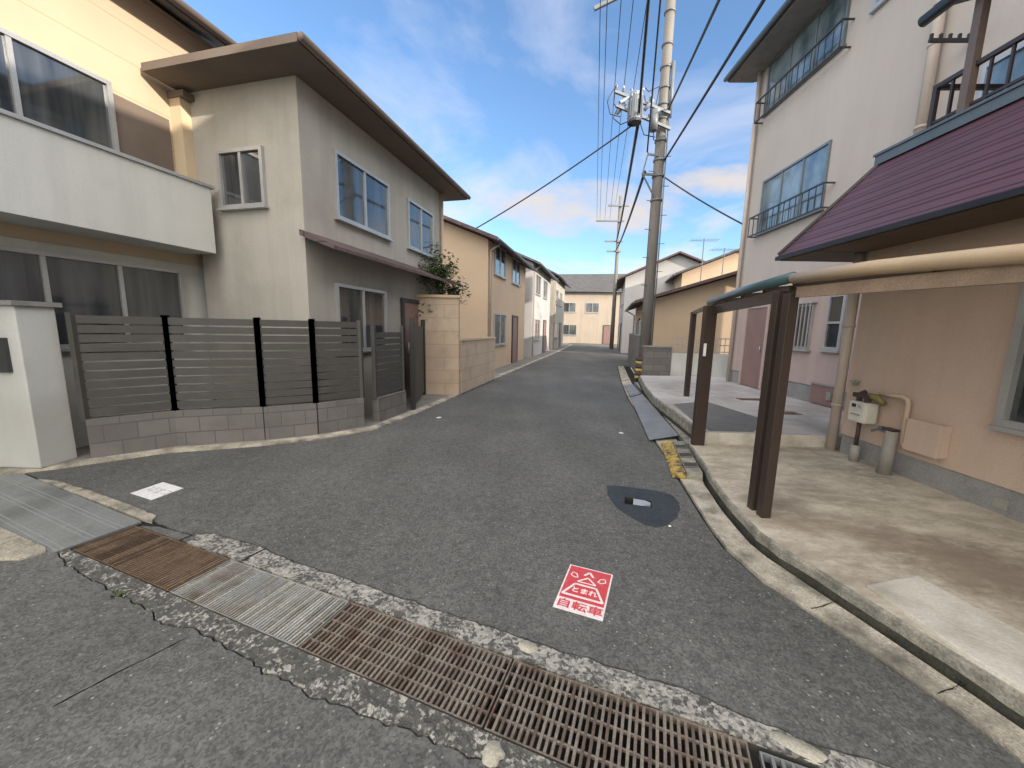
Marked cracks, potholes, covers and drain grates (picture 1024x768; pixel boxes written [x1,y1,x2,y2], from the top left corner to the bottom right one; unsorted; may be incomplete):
drain grate [170,559,349,650]
crack [938,681,967,693]
drain grate [484,659,753,768]
drain grate [298,602,512,730]
drain grate [72,526,229,593]
crack [51,561,432,743]
